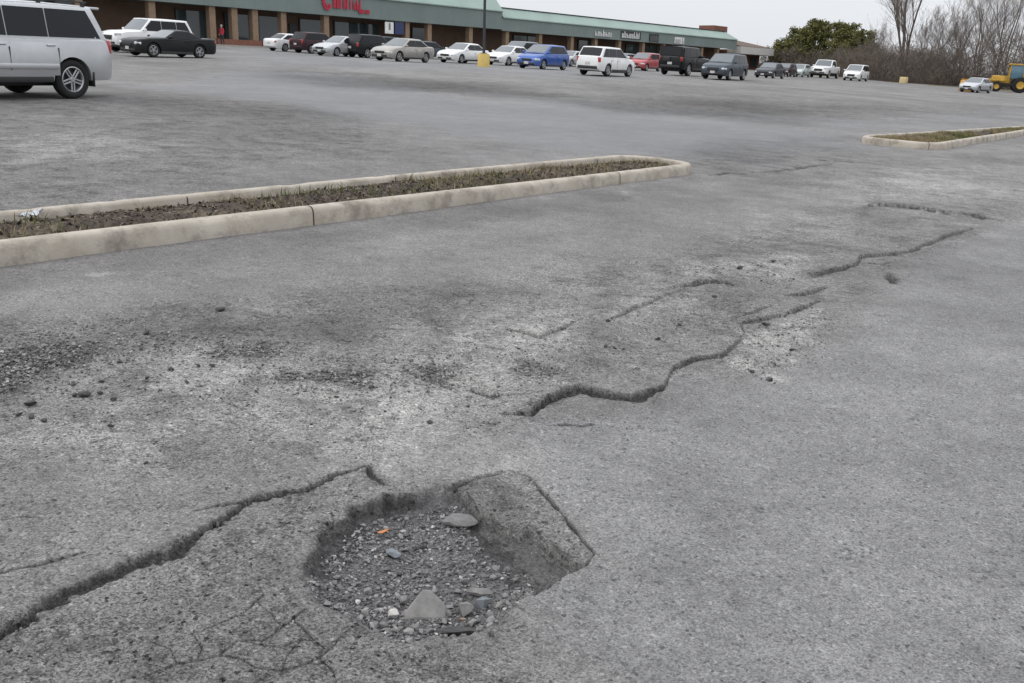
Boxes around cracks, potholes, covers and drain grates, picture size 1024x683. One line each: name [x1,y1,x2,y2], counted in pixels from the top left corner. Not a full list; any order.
crack [468,188,1024,428]
crack [0,463,390,683]
pothole [273,468,603,659]
